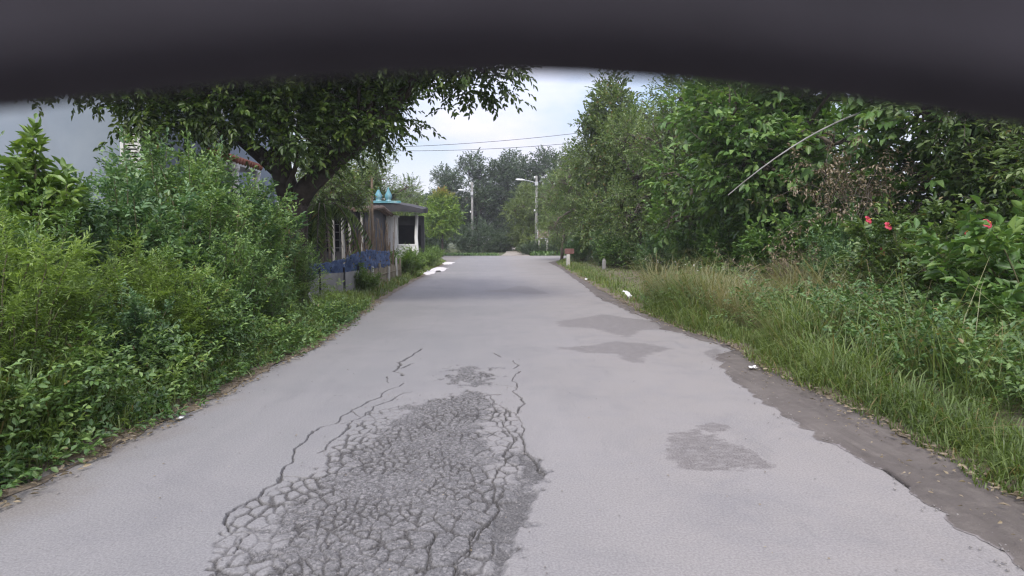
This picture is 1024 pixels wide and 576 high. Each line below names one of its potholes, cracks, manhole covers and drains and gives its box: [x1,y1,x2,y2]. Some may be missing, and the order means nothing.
crack [204,348,560,576]
